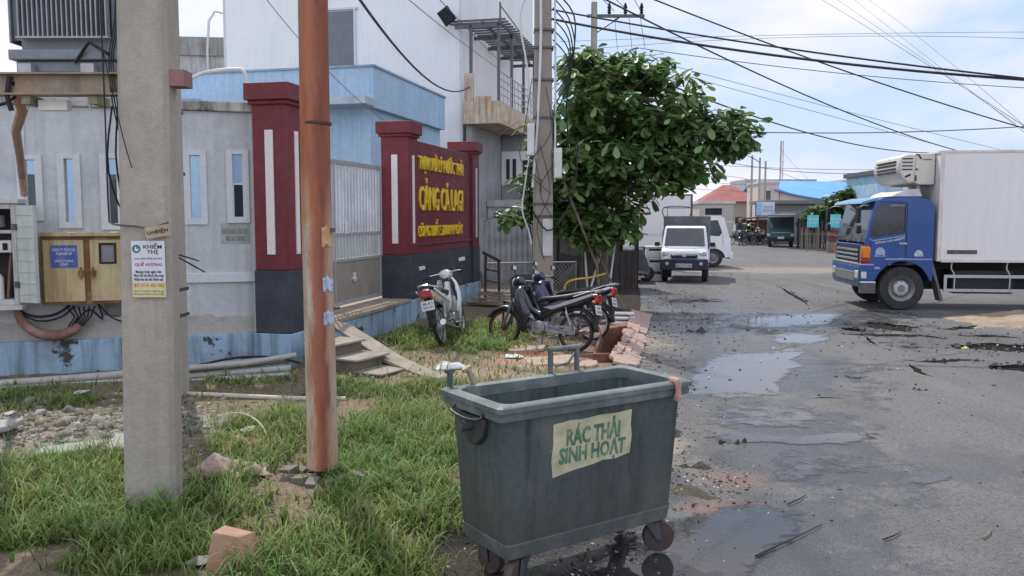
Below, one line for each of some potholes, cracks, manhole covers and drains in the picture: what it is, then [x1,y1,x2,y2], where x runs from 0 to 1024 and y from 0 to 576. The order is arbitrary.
crack [776,286,809,306]
pothole [988,360,1024,372]
crack [902,358,987,377]
pothole [950,342,1024,352]
